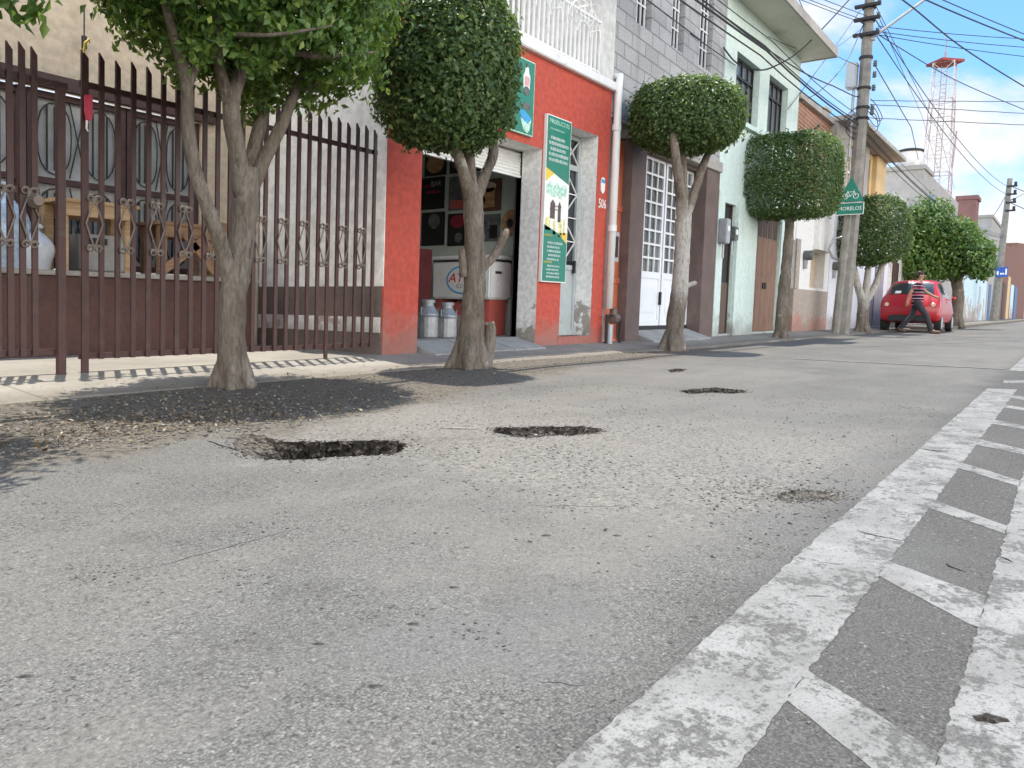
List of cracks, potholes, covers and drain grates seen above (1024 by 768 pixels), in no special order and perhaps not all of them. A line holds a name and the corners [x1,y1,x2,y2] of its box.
pothole [973,714,1009,724]
pothole [482,424,611,439]
pothole [676,387,754,395]
crack [119,528,300,573]
pothole [209,430,446,464]
pothole [769,488,849,503]
